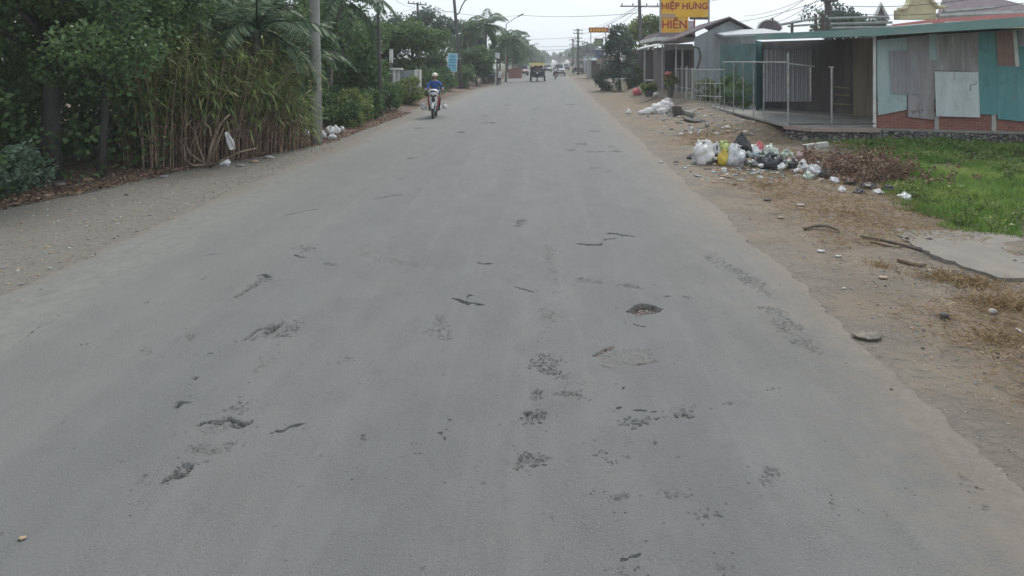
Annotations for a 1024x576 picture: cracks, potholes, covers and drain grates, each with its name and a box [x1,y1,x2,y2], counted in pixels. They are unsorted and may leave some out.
pothole [625,303,663,316]
crack [269,423,306,434]
crack [451,294,487,306]
pothole [186,415,254,439]
crack [575,232,635,246]
